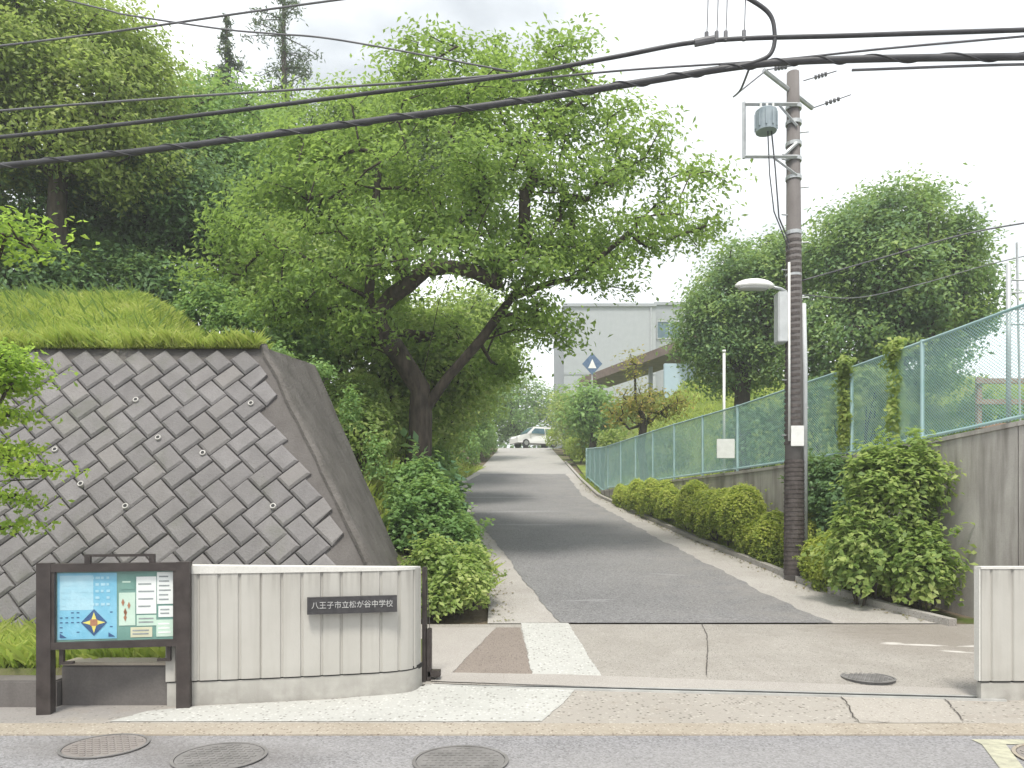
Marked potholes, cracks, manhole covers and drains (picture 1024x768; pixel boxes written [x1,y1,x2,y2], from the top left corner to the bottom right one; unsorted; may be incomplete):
manhole cover [169,742,268,768]
manhole cover [840,672,897,685]
manhole cover [412,745,509,768]
manhole cover [57,733,150,759]
manhole cover [1011,743,1024,760]
